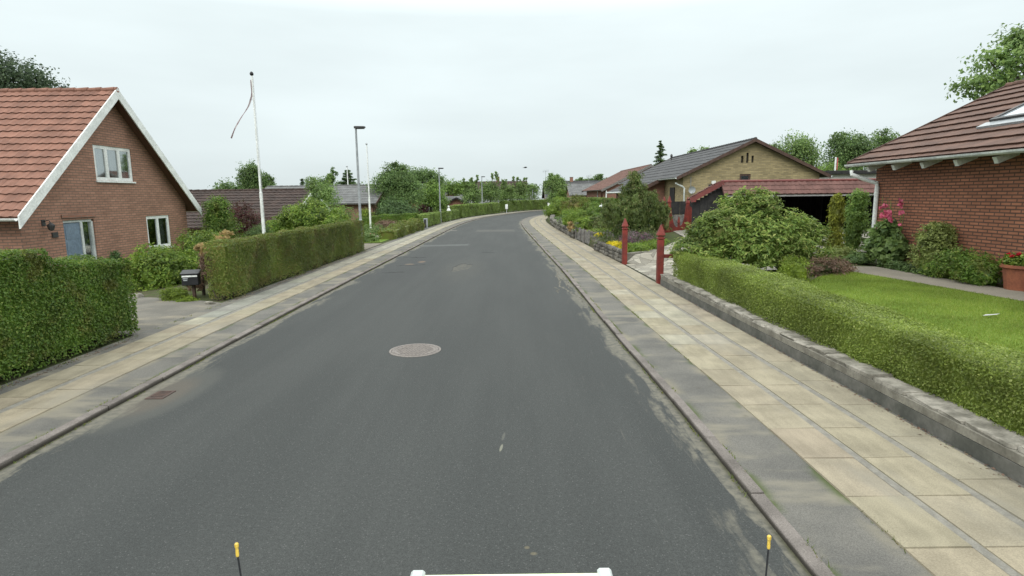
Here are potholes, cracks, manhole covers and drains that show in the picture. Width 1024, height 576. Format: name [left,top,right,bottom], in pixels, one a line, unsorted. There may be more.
manhole cover [389,343,441,357]
drain grate [145,391,175,399]
